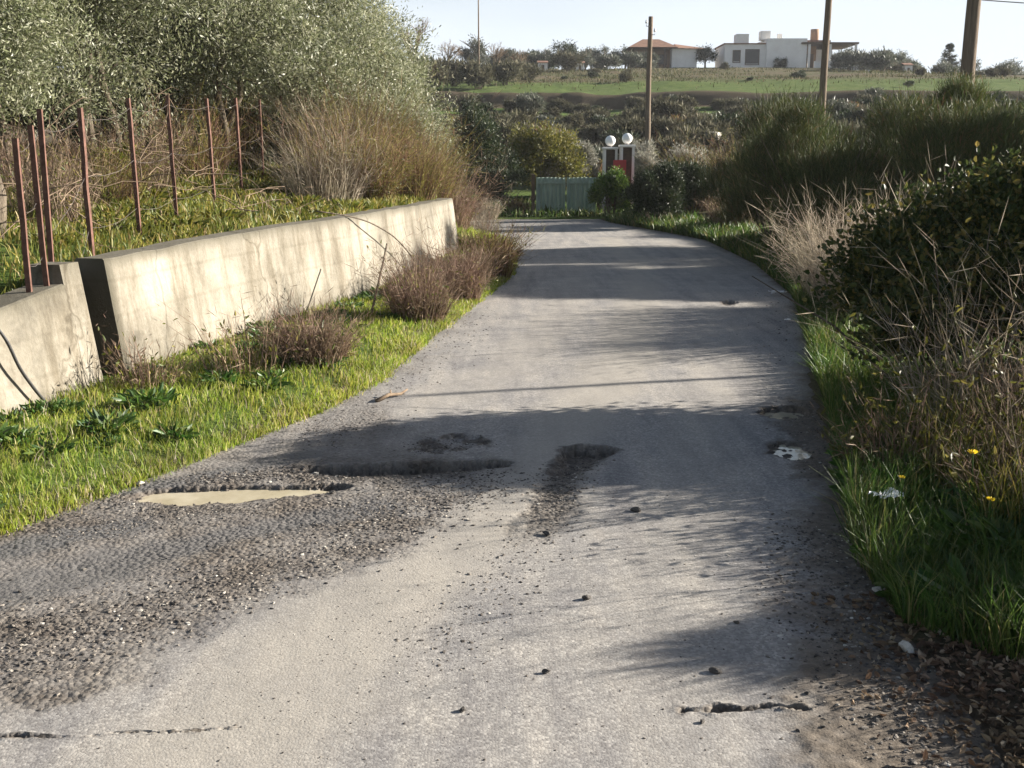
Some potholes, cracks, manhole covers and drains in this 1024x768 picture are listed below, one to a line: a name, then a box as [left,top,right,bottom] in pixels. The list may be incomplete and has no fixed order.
pothole [110,481,360,508]
crack [0,726,241,742]
pothole [276,458,515,481]
pothole [540,443,626,481]
pothole [762,438,823,461]
pothole [404,432,498,456]
pothole [754,405,816,421]
crack [672,701,814,717]
